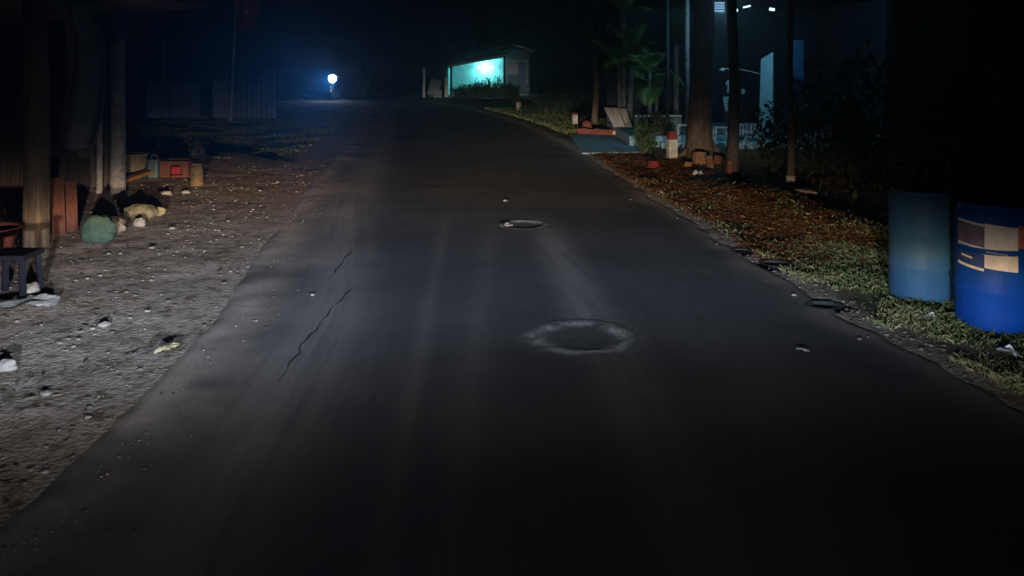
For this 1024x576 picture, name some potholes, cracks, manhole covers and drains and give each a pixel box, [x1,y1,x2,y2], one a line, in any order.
crack [279,249,356,381]
pothole [519,319,640,356]
